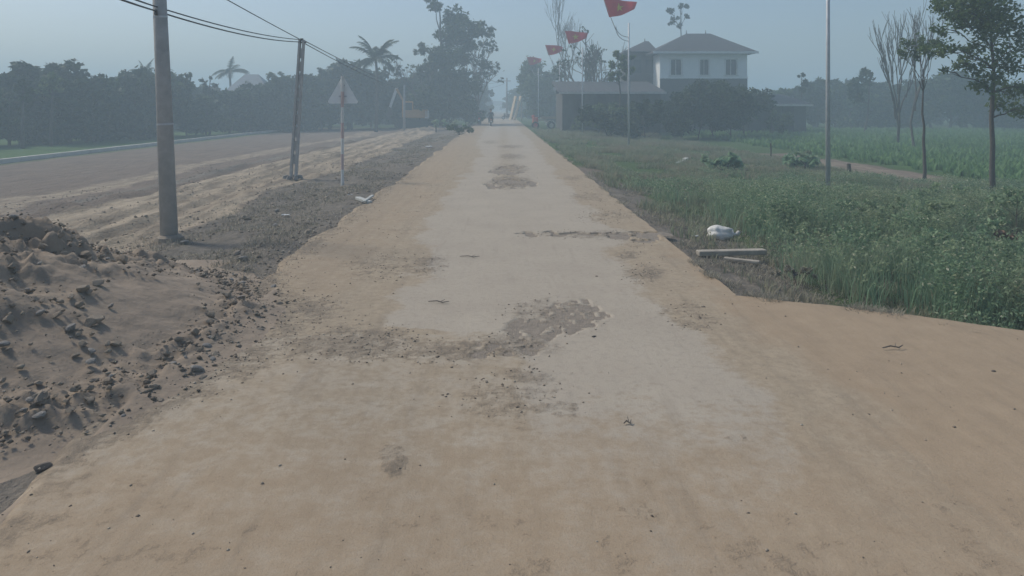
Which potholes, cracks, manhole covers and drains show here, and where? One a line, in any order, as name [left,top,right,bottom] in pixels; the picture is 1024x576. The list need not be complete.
pothole [488,165,527,175]
pothole [485,177,537,189]
pothole [471,299,611,359]
